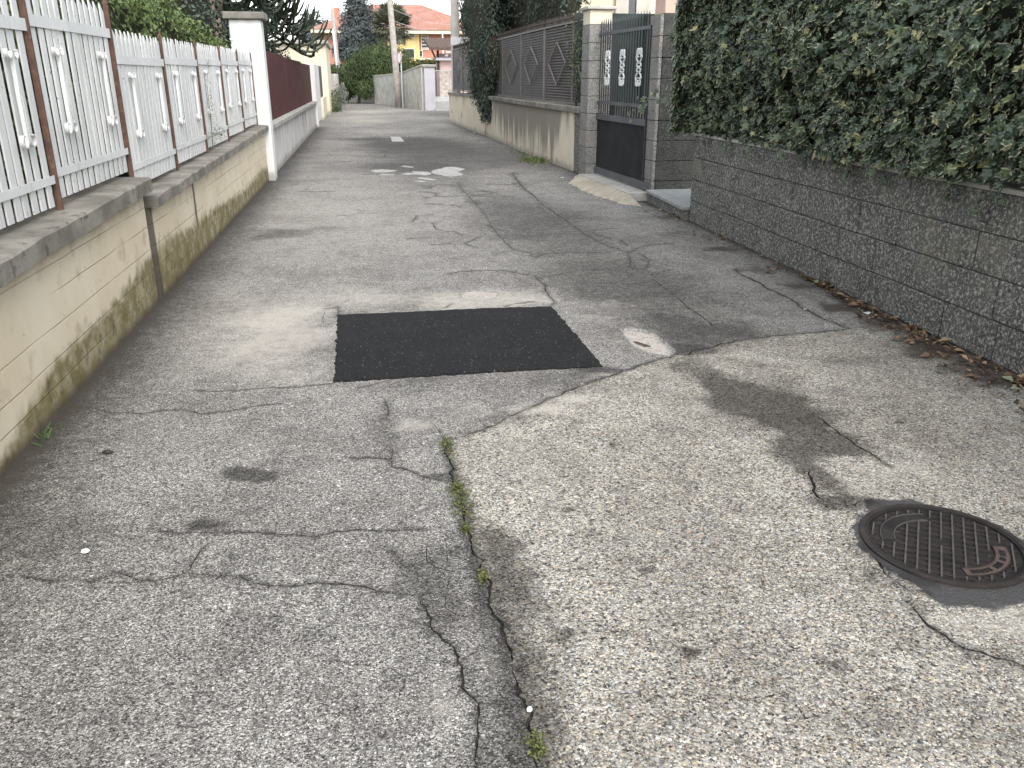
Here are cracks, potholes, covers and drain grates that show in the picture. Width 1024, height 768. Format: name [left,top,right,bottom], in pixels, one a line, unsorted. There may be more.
manhole cover [859,504,1024,589]
crack [93,383,443,434]
crack [349,454,450,482]
crack [876,560,1024,667]
crack [24,529,422,596]
crack [413,174,721,334]
crack [808,417,891,506]
crack [392,541,512,767]
